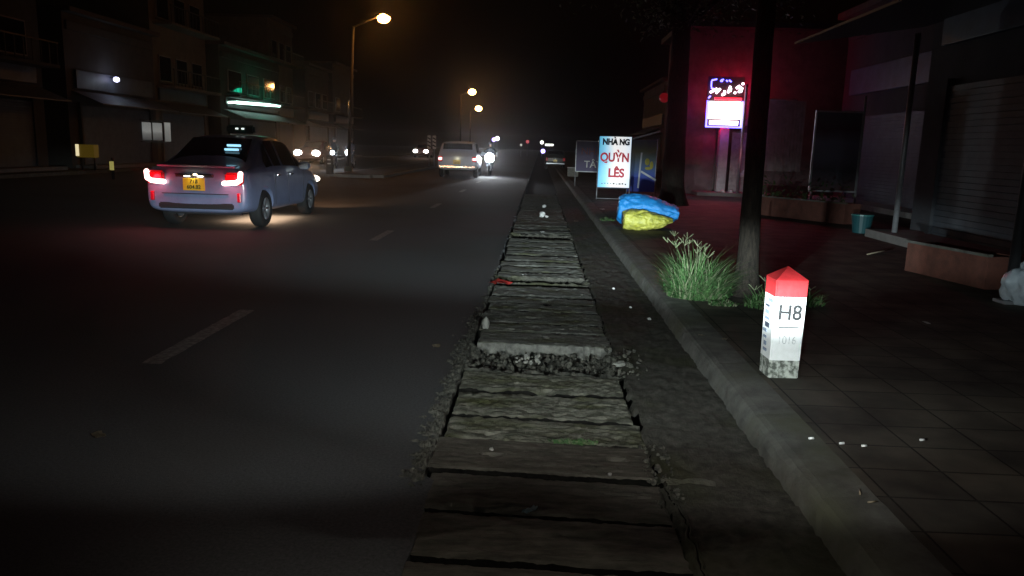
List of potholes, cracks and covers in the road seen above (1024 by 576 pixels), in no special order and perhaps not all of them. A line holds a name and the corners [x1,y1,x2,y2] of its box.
crack [661,478,716,576]
pothole [463,342,623,379]
